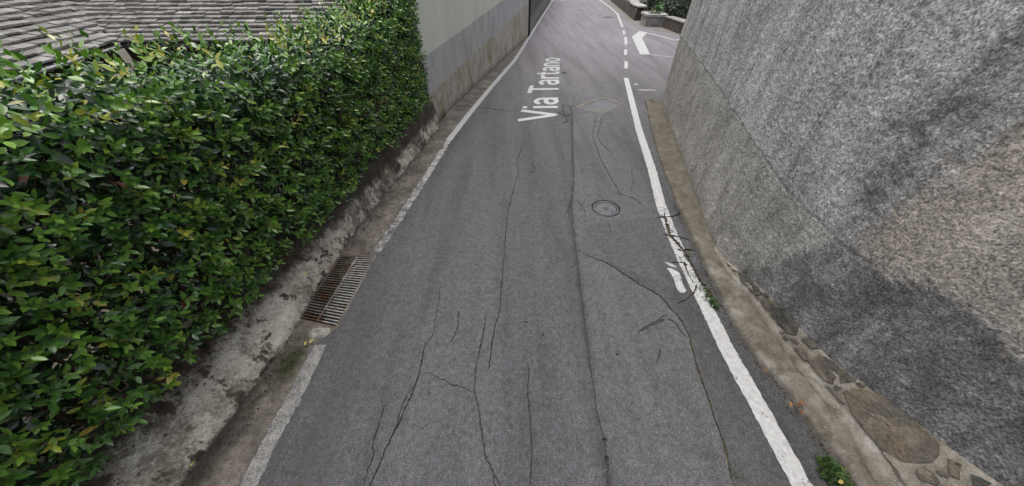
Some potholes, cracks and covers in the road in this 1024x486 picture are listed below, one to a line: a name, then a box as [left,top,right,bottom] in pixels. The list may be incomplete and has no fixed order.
crack [579,116,734,486]
drain grate [300,254,375,328]
manhole cover [575,97,624,114]
crack [364,144,535,486]
manhole cover [592,201,620,217]
